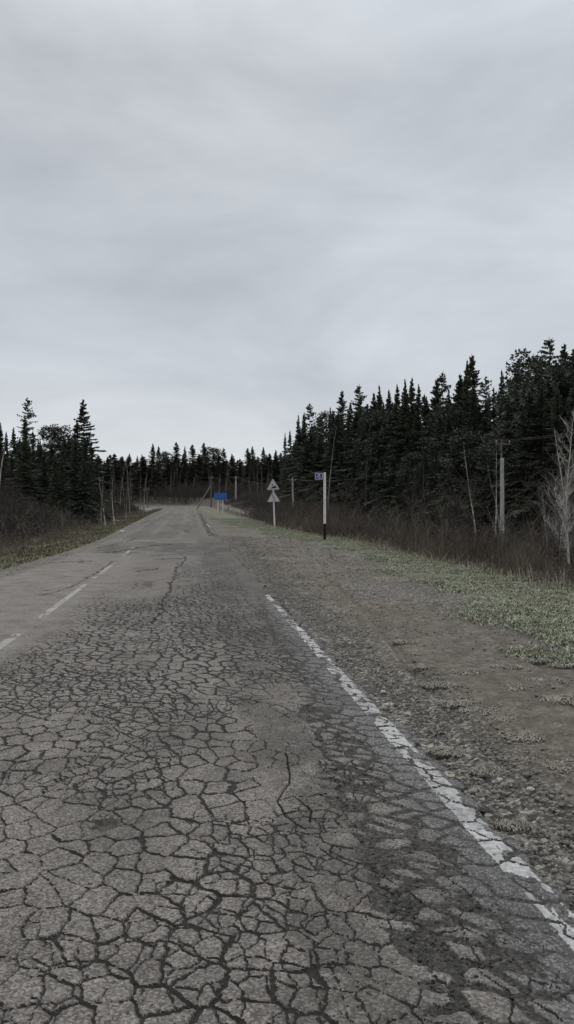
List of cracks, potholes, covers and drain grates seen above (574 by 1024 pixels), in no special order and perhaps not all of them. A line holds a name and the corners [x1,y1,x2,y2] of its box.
crack [0,513,574,1024]
